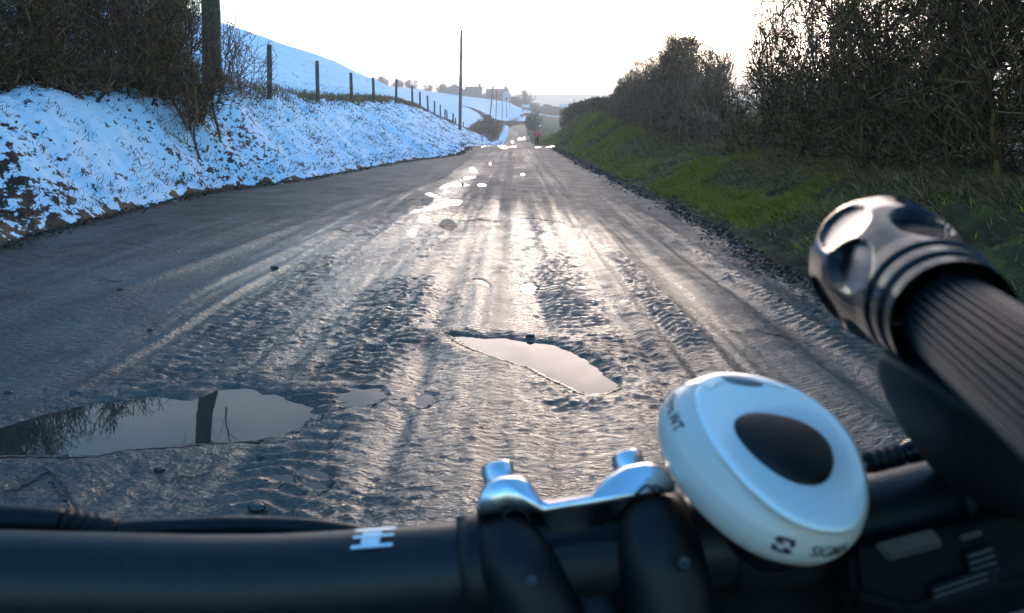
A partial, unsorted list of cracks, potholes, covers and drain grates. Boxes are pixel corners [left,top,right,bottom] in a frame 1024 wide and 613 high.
pothole [444,329,628,395]
pothole [330,384,390,408]
pothole [409,390,438,408]
pothole [0,381,327,457]
pothole [438,219,457,230]
